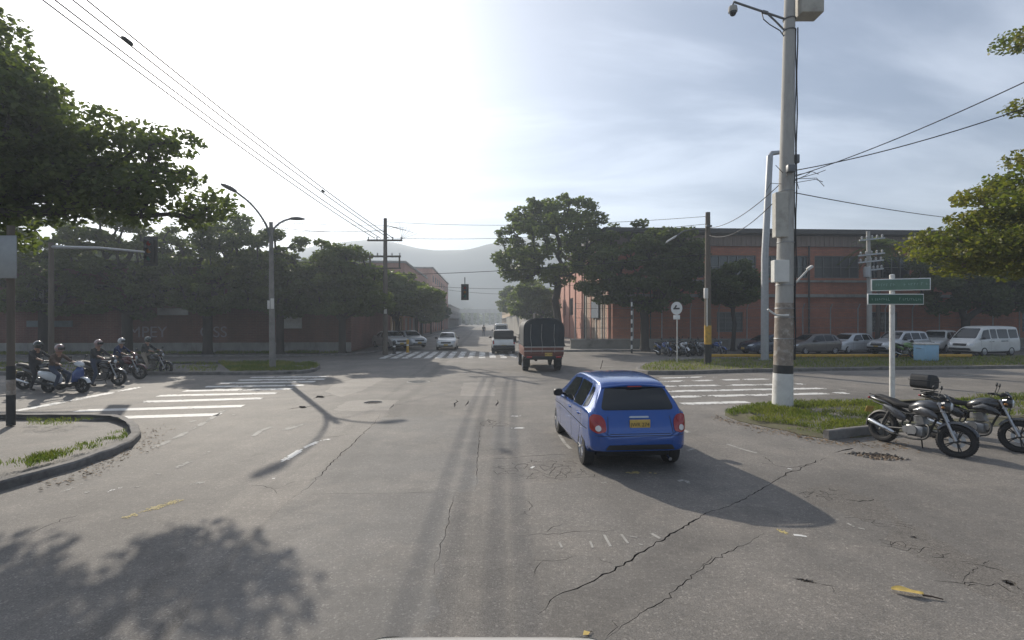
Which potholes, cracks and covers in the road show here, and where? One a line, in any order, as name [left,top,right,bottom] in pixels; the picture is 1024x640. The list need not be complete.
crack [492,449,595,479]
pothole [845,451,909,461]
crack [523,448,1023,640]
